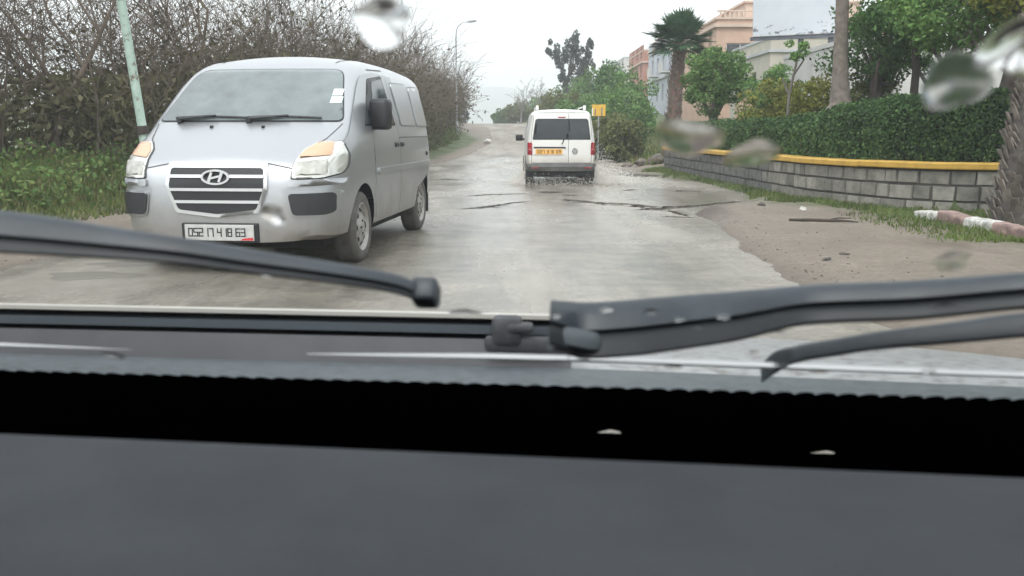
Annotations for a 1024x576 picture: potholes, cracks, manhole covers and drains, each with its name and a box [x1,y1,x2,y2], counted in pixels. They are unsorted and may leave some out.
crack [430,179,742,218]
